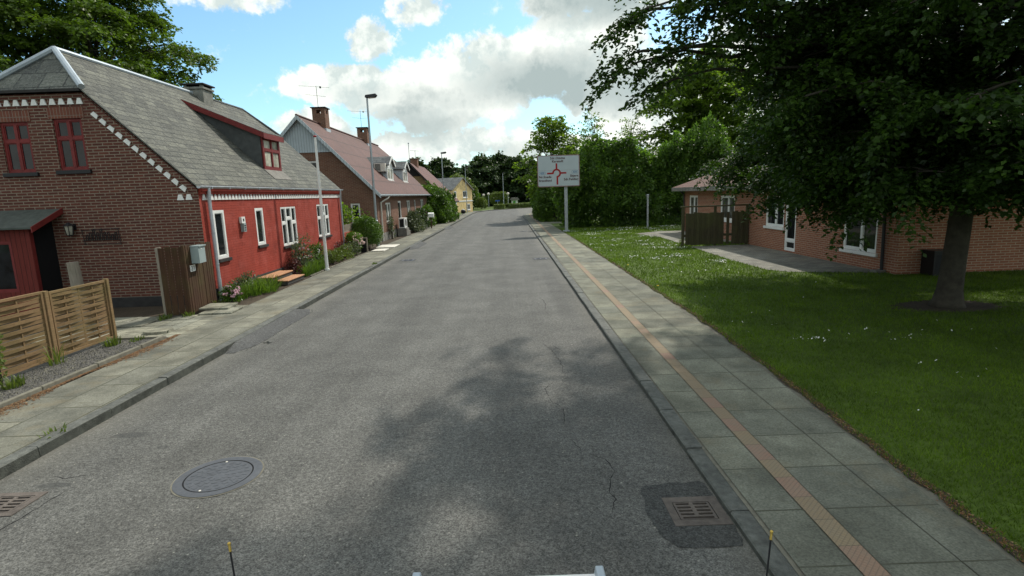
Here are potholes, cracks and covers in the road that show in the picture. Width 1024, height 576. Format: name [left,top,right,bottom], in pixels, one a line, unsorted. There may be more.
drain grate [662,496,733,526]
crack [545,346,617,514]
drain grate [0,491,48,517]
manhole cover [170,456,264,499]
